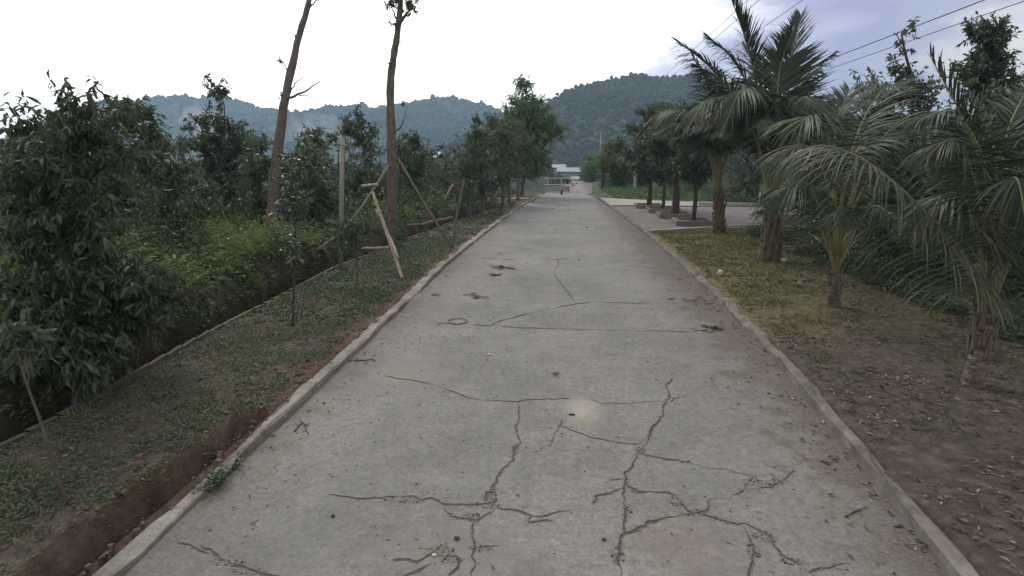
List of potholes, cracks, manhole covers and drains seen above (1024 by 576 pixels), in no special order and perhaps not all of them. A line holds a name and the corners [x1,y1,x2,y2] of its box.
crack [439,260,722,332]
crack [329,375,846,576]
crack [177,541,279,576]
